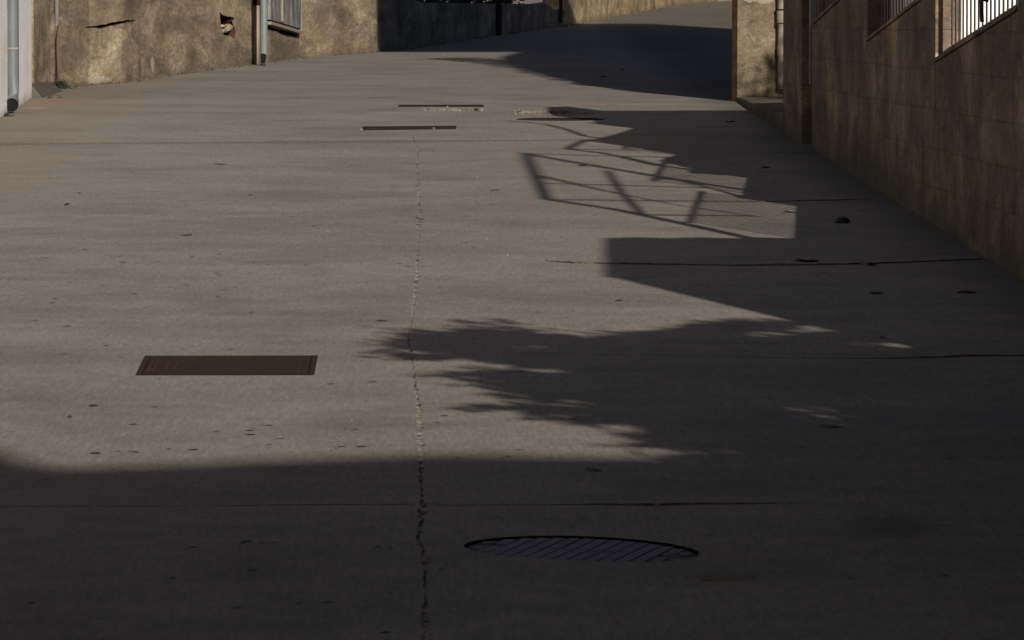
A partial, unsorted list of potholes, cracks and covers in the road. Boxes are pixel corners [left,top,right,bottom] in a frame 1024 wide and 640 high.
manhole cover [460,535,703,563]
